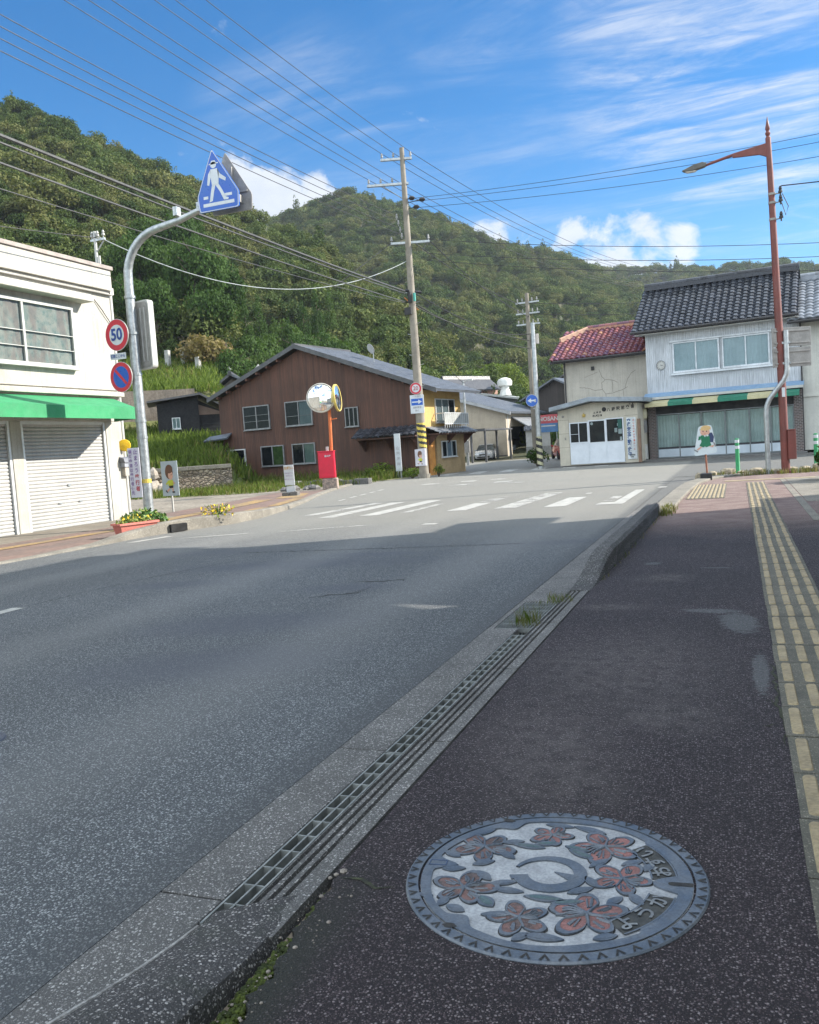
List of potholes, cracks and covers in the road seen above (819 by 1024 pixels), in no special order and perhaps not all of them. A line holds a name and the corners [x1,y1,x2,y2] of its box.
crack [310,579,407,598]
drain grate [463,635,524,682]
manhole cover [406,813,710,966]
drain grate [199,753,402,925]
drain grate [385,681,476,755]
drain grate [496,602,558,635]
